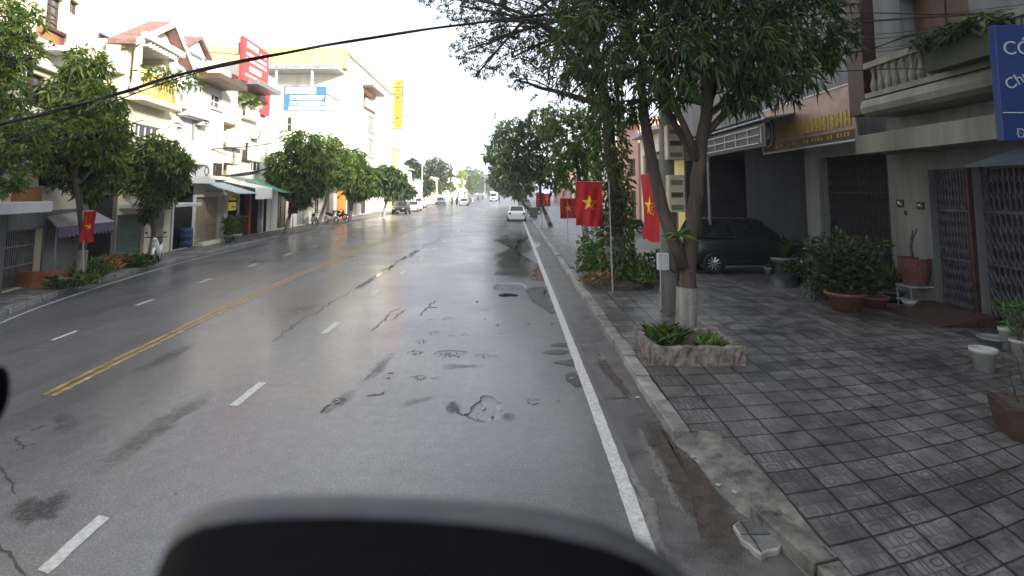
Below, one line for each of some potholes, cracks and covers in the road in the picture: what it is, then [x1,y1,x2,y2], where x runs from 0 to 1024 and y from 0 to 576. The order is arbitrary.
pothole [433,350,470,358]
crack [273,293,349,341]
pothole [463,395,504,423]
crack [371,301,437,331]
crack [0,544,26,575]
crack [0,466,16,494]
crack [14,425,45,449]
